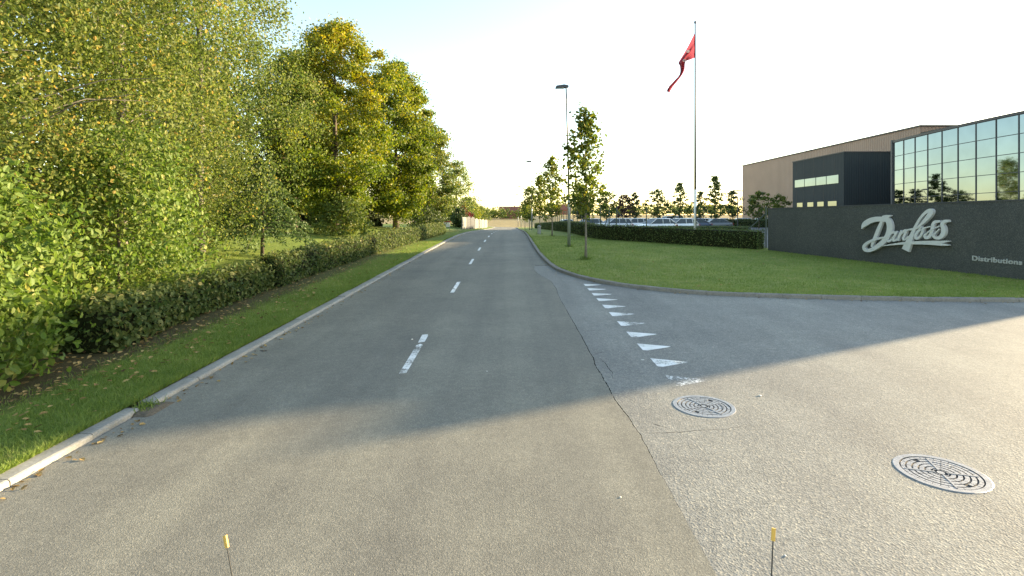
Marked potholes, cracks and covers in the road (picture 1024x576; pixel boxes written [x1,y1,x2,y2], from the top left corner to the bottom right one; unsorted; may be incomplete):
crack [535,265,740,556]
manhole cover [673,395,736,418]
manhole cover [892,454,994,494]
